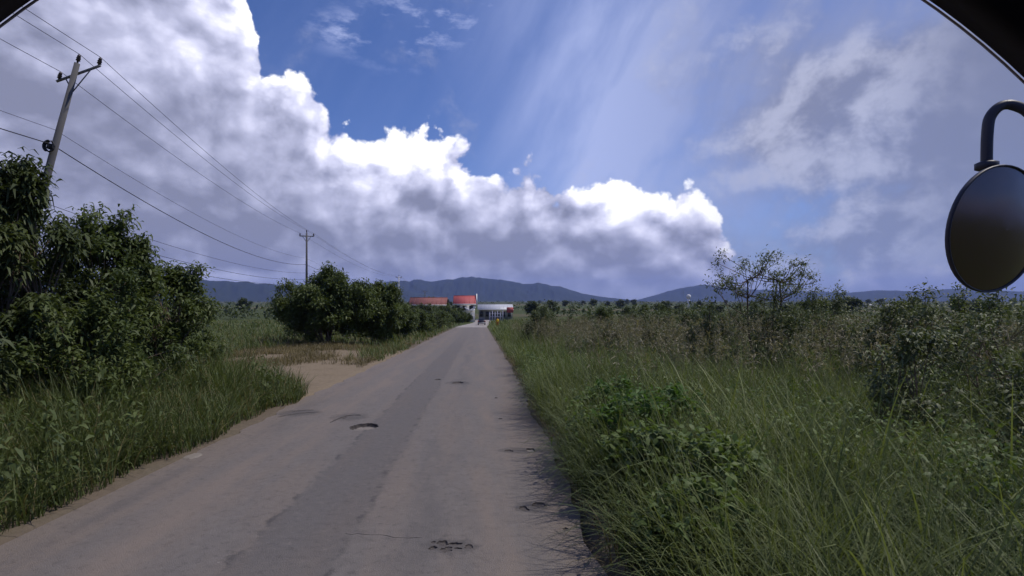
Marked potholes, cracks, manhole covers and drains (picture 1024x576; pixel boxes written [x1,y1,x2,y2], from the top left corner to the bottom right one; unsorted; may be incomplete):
pothole [428,540,473,553]
pothole [349,423,379,431]
